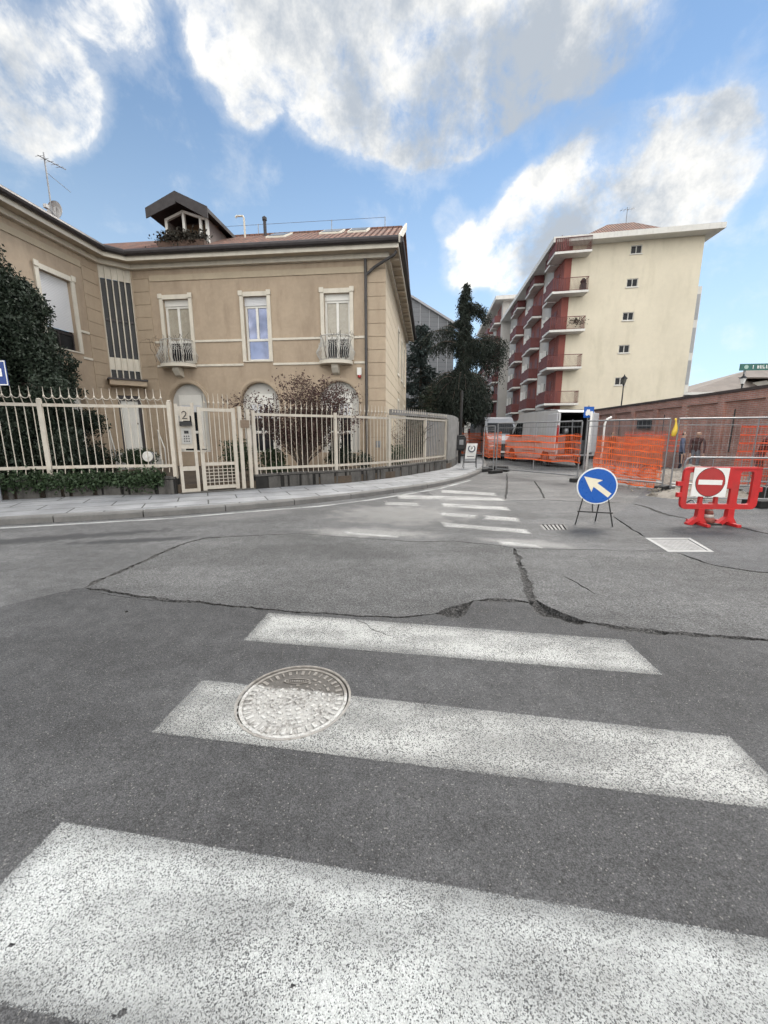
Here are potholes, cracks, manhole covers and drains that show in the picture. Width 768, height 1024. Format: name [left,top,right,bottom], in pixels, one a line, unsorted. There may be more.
crack [72,516,768,642]
manhole cover [646,538,714,552]
manhole cover [234,665,351,741]
